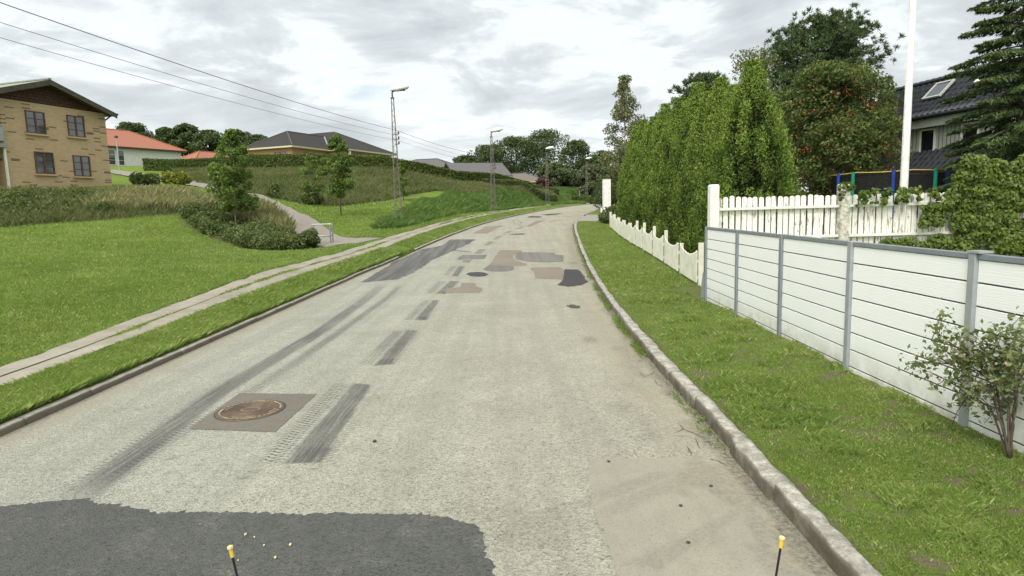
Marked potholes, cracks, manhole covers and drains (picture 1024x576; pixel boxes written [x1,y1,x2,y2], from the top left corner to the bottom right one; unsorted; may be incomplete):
manhole cover [214,400,286,421]
